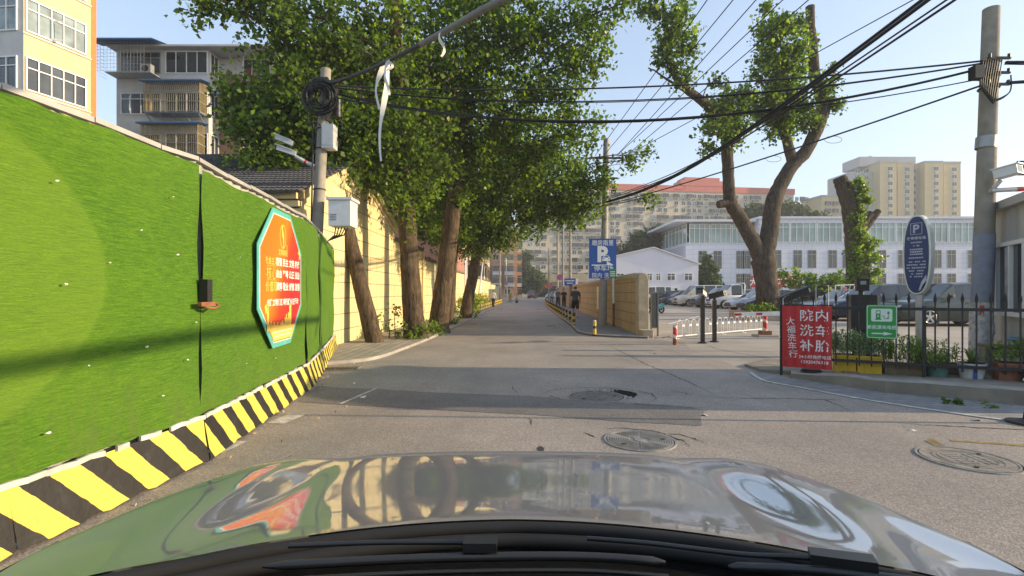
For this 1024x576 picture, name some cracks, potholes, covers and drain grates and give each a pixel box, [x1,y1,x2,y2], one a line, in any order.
manhole cover [604,430,677,452]
manhole cover [914,446,1024,475]
manhole cover [568,391,626,403]
crack [586,428,705,446]
